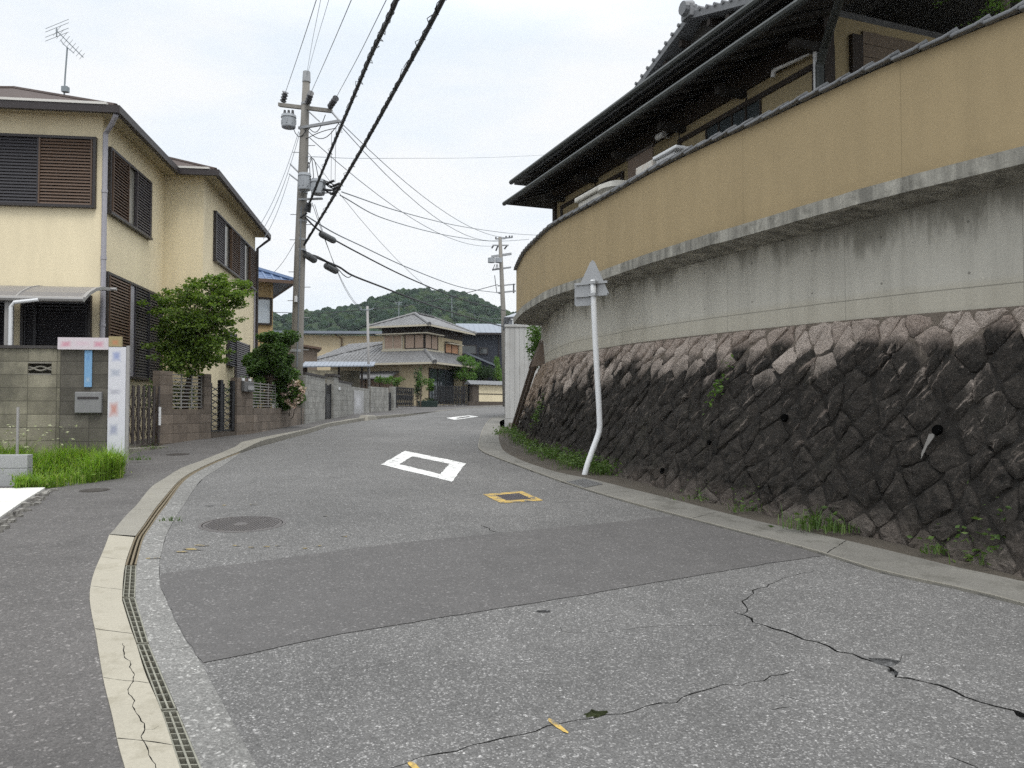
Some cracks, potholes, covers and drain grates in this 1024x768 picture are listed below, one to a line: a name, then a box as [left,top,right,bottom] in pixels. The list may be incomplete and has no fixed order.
crack [122,643,158,768]
drain grate [567,478,602,488]
drain grate [137,644,176,712]
drain grate [123,598,149,645]
crack [391,671,806,768]
crack [560,572,1024,718]
manhole cover [198,516,286,533]
manhole cover [484,491,541,503]
drain grate [122,566,136,602]
drain grate [162,711,201,768]
